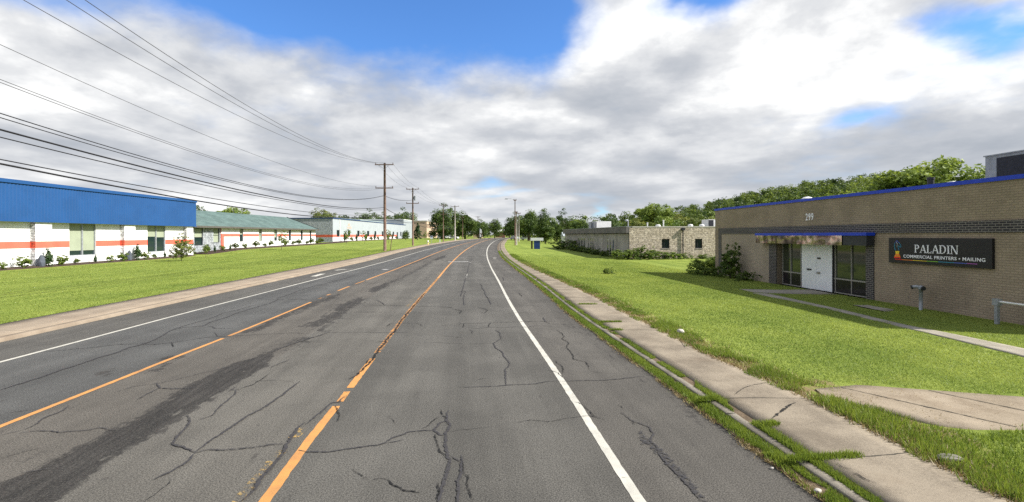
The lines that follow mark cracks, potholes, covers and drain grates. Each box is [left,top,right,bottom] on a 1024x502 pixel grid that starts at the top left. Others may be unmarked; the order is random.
crack [0,264,641,502]
